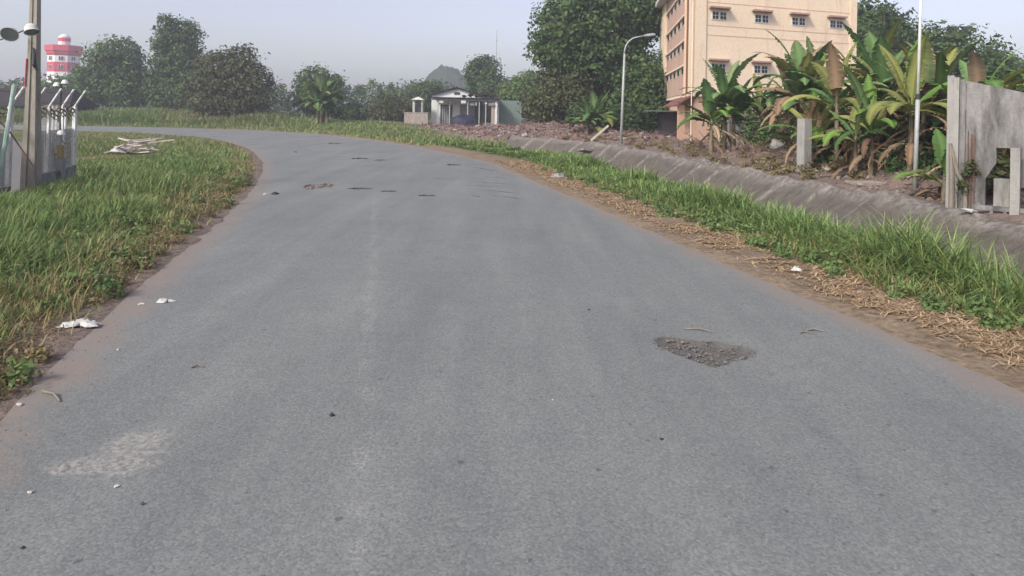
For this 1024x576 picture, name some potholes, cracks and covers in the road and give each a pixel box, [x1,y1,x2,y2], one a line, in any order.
pothole [653,335,757,369]
